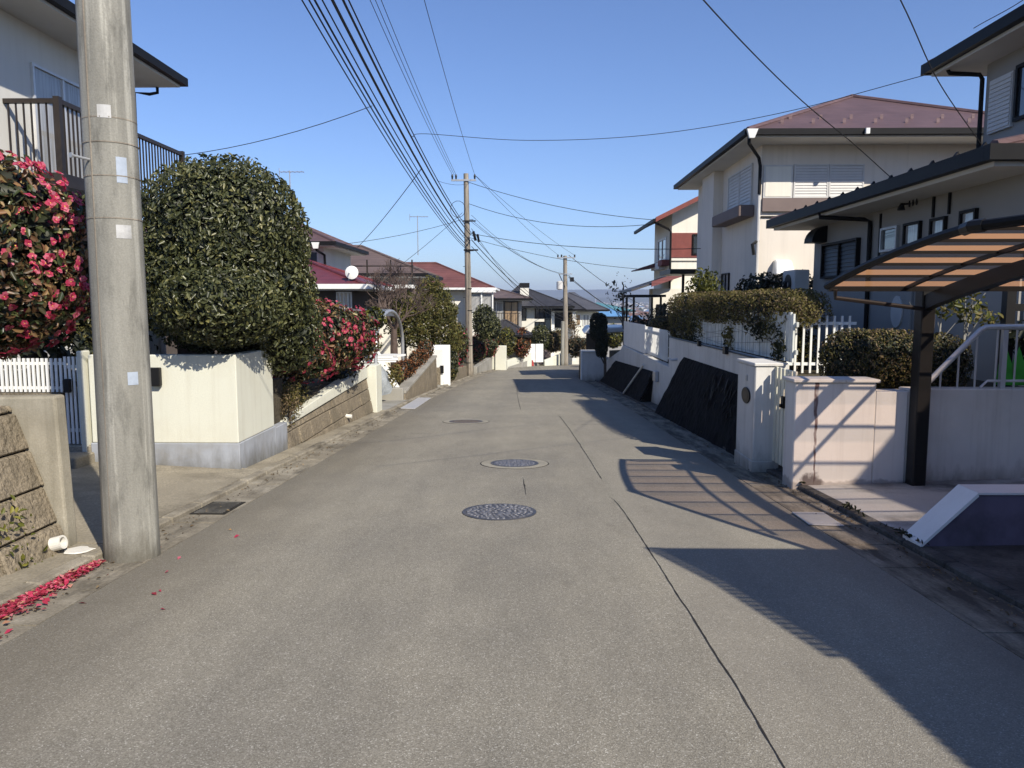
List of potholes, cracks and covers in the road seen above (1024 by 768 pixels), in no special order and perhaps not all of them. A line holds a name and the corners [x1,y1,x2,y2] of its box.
drain grate [190,502,245,514]
manhole cover [480,458,549,469]
manhole cover [462,504,536,521]
